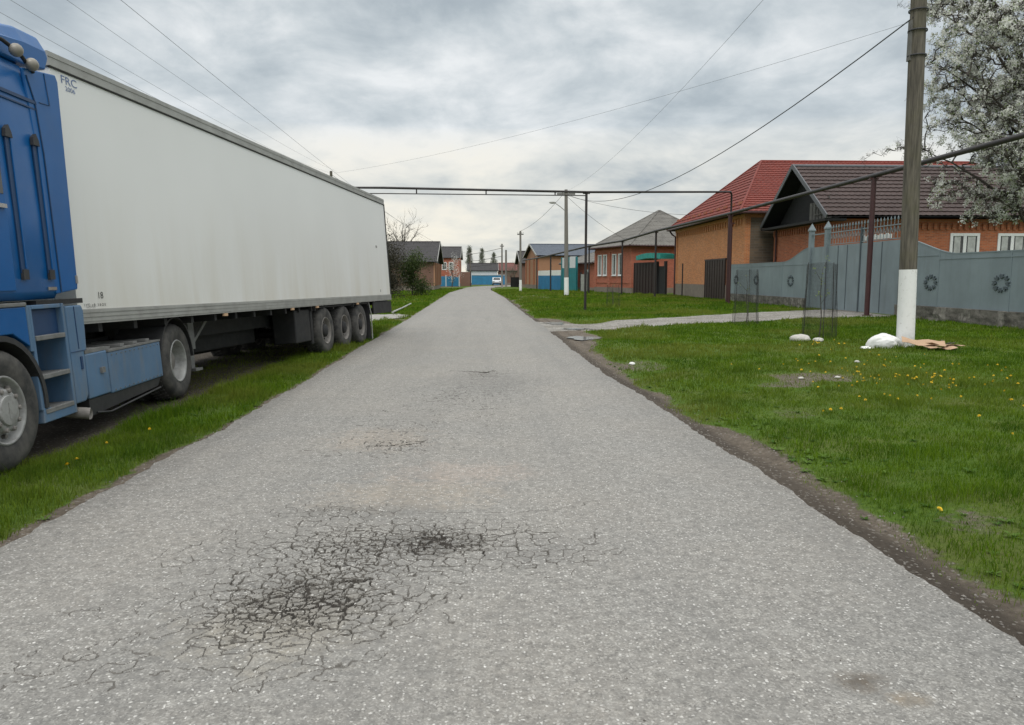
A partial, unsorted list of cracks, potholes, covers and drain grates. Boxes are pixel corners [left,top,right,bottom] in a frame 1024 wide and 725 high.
crack [295,370,549,463]
crack [0,500,626,694]
